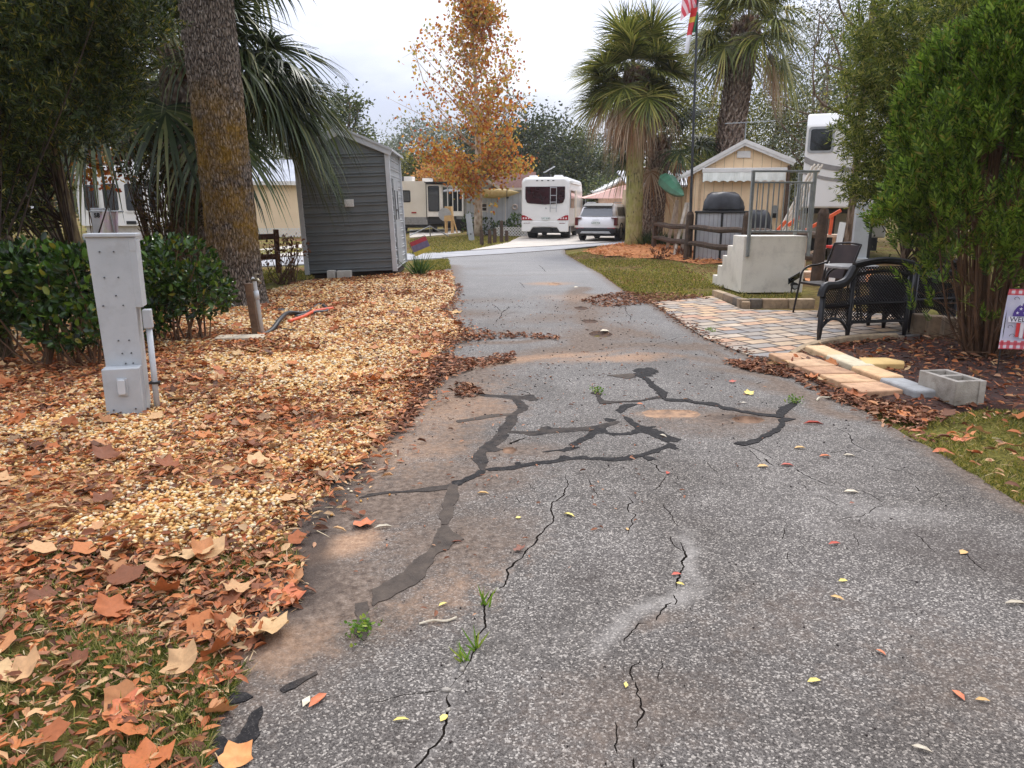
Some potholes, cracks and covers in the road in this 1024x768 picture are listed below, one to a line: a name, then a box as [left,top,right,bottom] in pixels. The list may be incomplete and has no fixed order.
crack [370,443,688,768]
